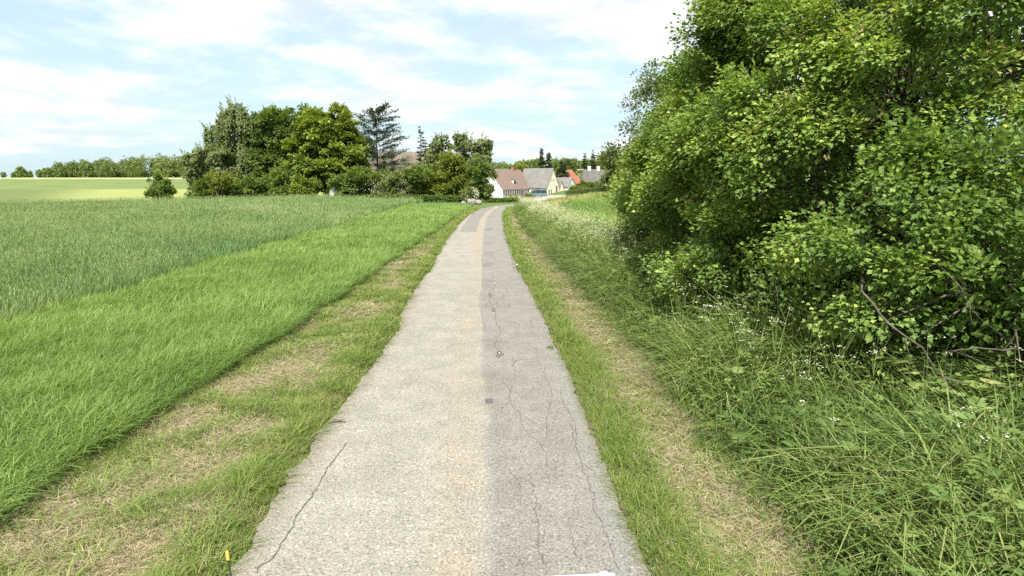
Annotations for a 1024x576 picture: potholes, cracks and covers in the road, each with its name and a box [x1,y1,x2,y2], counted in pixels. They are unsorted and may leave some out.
crack [255,442,348,573]
crack [480,234,619,573]
